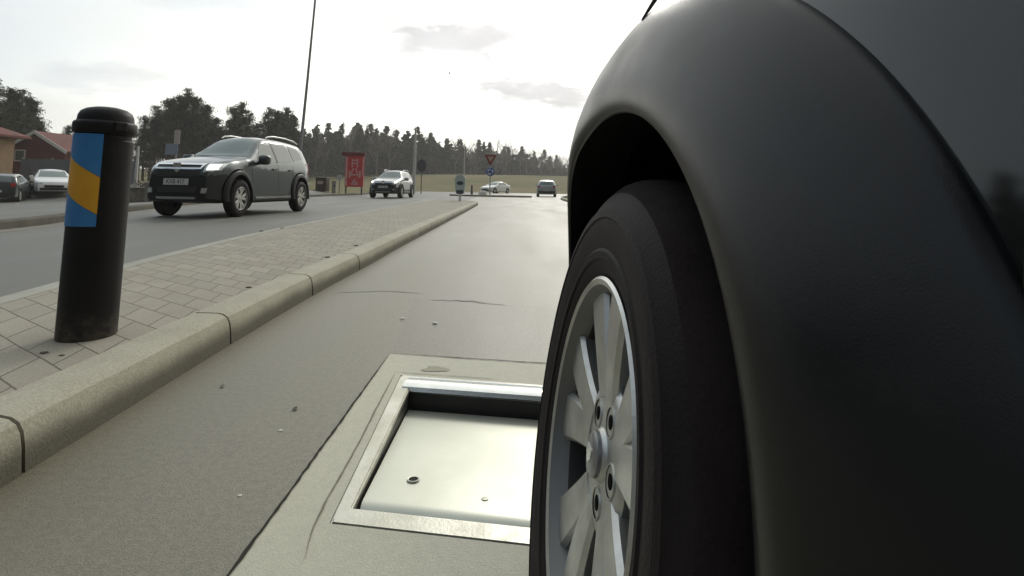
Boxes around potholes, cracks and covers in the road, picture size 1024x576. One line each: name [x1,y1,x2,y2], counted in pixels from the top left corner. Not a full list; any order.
manhole cover [330,375,543,546]
crack [354,291,503,305]
